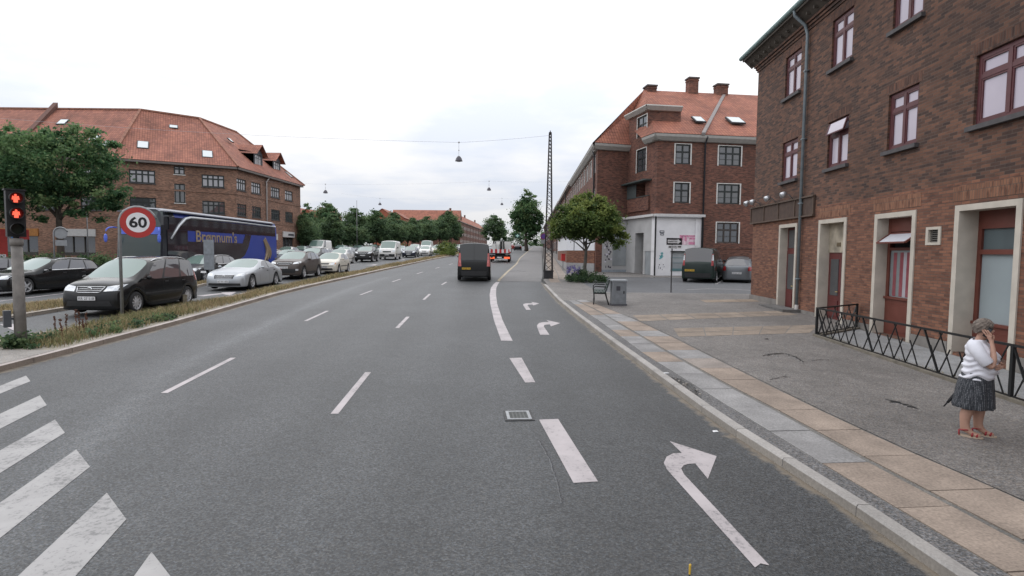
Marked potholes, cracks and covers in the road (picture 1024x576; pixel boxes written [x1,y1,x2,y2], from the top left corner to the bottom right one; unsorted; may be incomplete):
crack [538,440,564,503]
crack [763,353,829,380]
crack [884,399,918,409]
